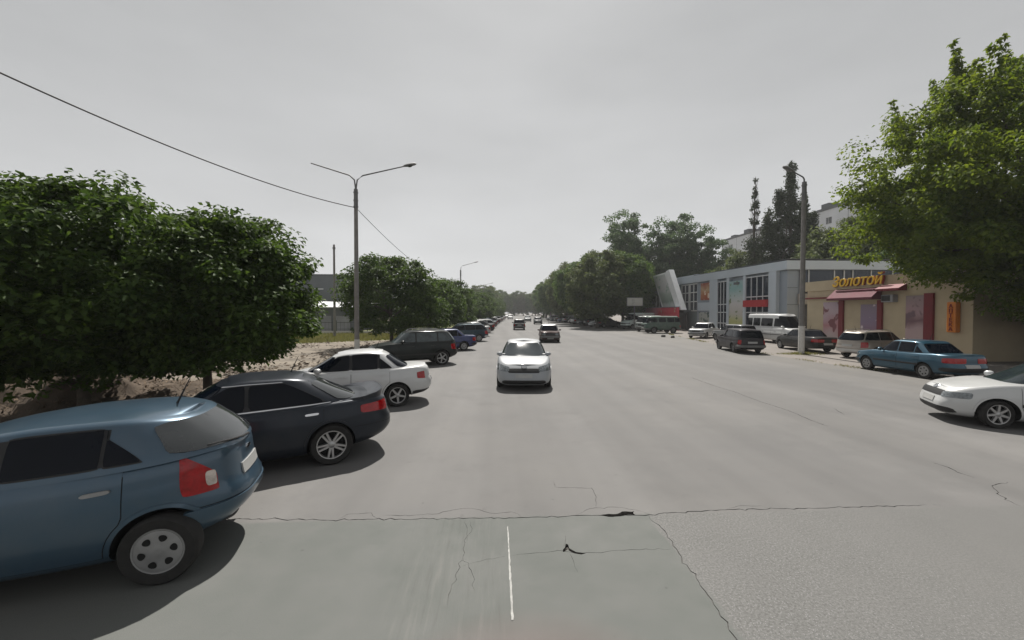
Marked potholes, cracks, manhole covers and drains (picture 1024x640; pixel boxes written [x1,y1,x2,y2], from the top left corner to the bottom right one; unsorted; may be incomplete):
crack [225,484,920,606]
